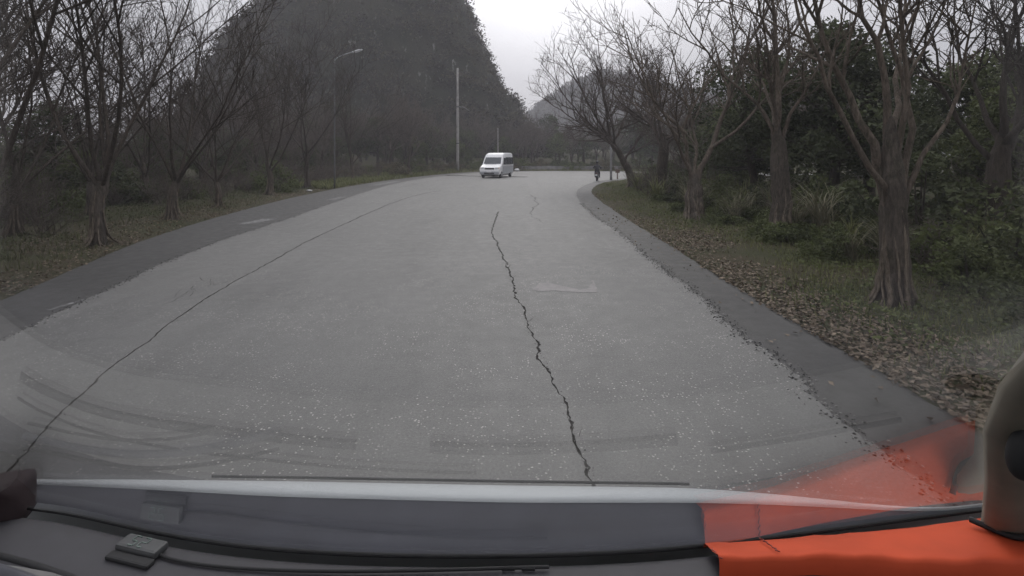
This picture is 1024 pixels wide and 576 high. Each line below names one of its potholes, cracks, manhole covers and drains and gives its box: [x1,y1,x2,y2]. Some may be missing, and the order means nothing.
crack [6,191,435,472]
crack [491,212,596,487]
